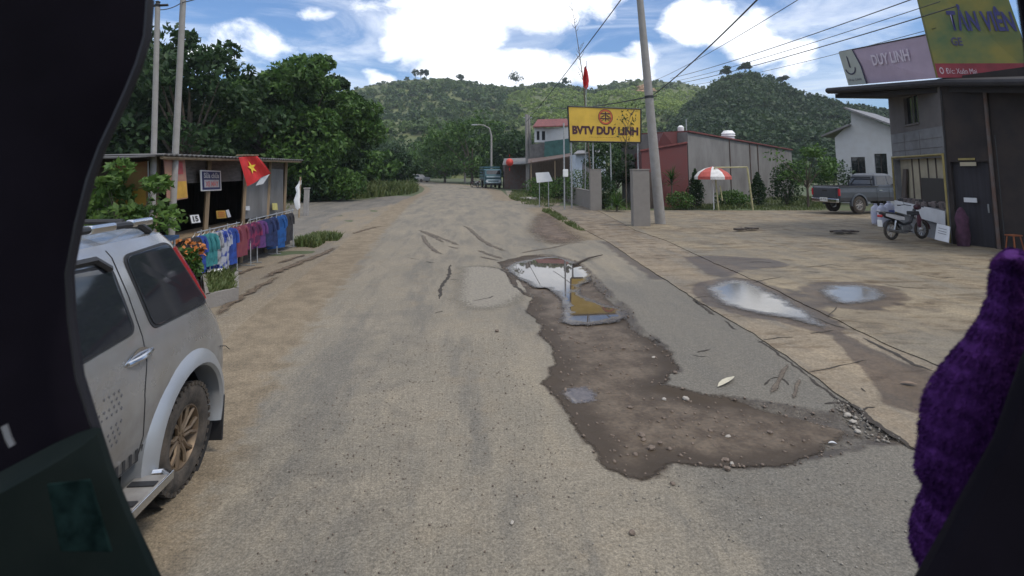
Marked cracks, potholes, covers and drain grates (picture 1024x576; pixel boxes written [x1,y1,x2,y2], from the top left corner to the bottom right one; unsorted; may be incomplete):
crack [759,307,837,385]
crack [412,258,457,313]
pothole [498,255,860,480]
